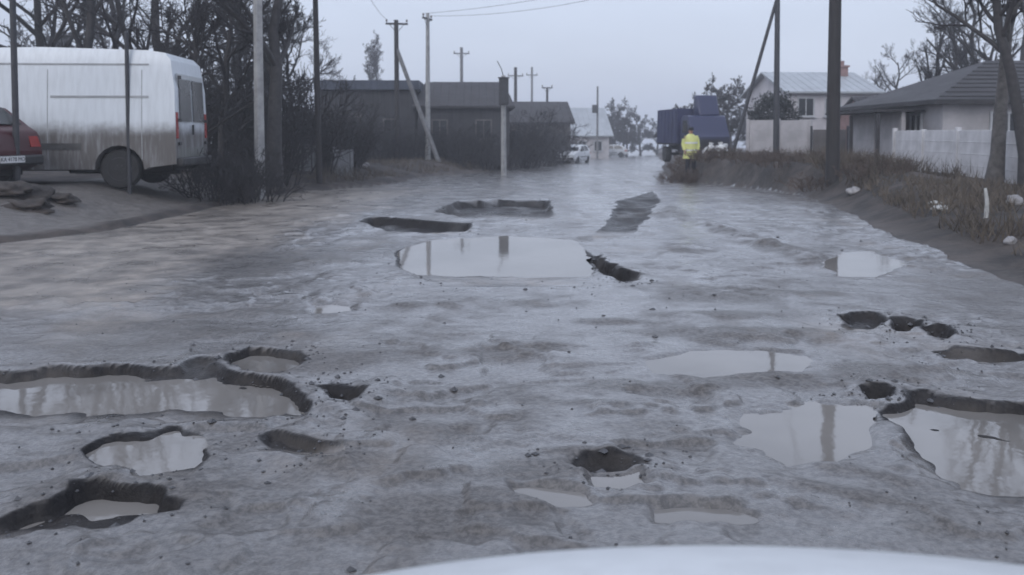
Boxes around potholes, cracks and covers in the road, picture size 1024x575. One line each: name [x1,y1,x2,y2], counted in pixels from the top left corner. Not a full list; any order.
pothole [0,354,323,429]
pothole [589,254,653,283]
pothole [886,314,928,332]
pothole [392,236,610,288]
pothole [588,191,662,243]
pothole [434,199,559,221]
pothole [357,216,476,234]
pothole [833,310,887,334]
pothole [873,384,1024,552]
pothole [253,427,358,458]
pothole [561,445,659,478]
pothole [916,323,962,340]
